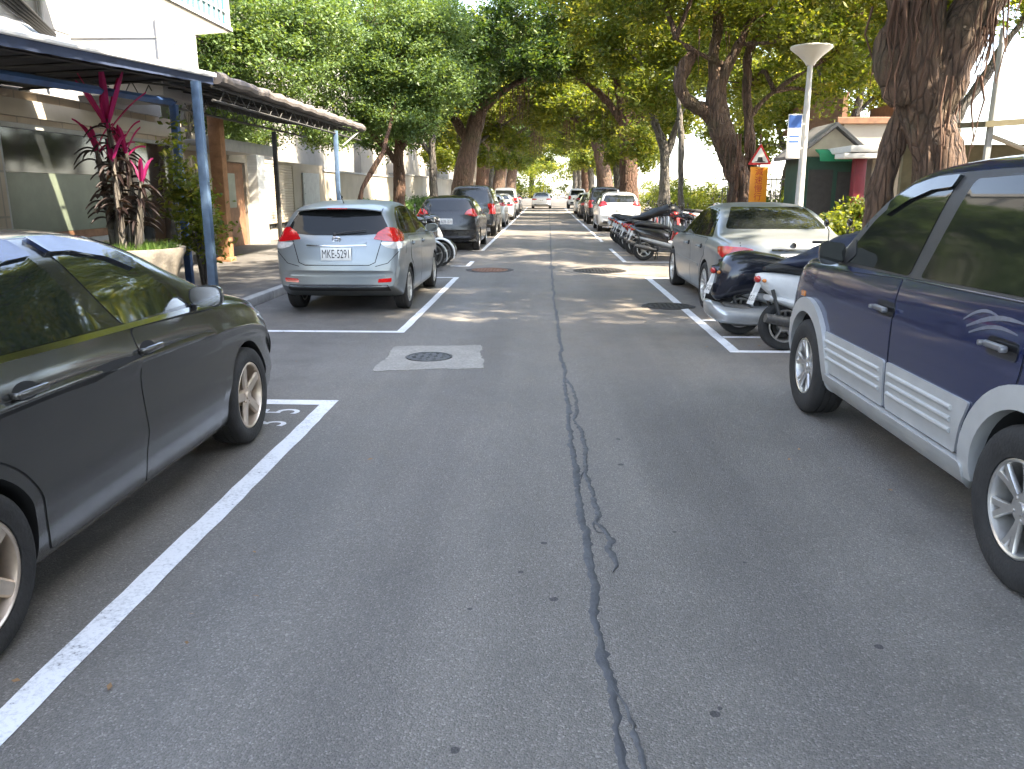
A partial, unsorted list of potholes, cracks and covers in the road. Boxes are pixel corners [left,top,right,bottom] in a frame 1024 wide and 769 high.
manhole cover [565,267,634,275]
